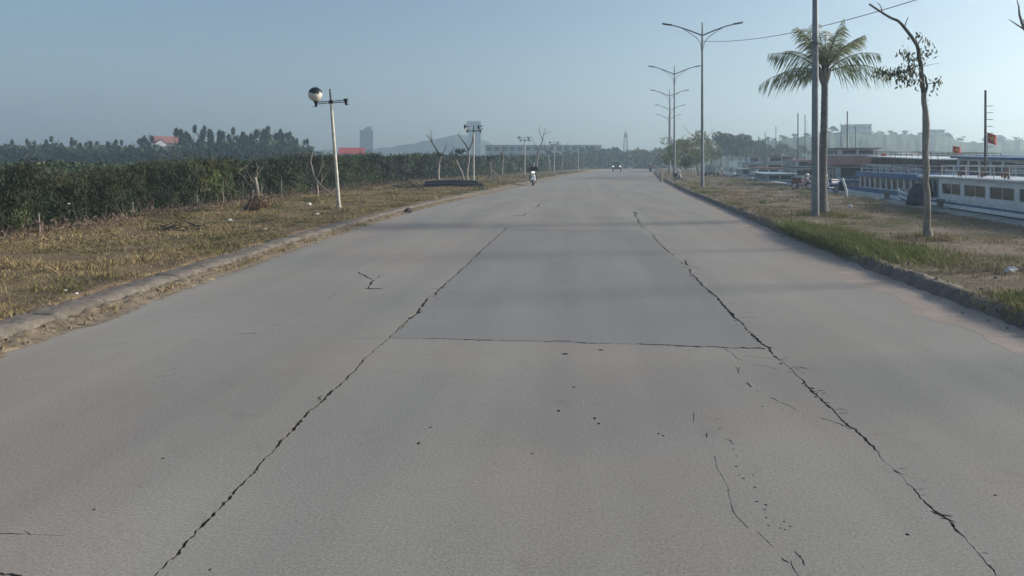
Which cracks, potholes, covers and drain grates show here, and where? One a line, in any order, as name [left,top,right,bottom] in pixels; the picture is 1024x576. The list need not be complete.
crack [327,272,381,299]
crack [355,212,996,576]
